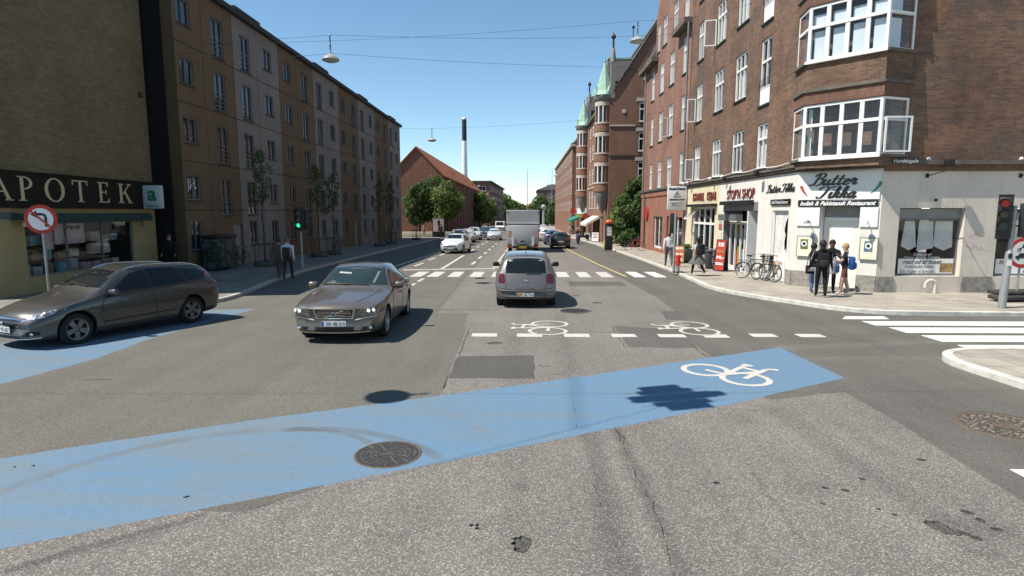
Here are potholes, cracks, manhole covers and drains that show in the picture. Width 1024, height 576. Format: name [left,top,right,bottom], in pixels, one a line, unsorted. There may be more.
crack [615,428,675,576]
manhole cover [354,441,422,468]
pothole [923,510,1003,541]
manhole cover [951,411,1024,442]
pothole [511,535,531,554]
